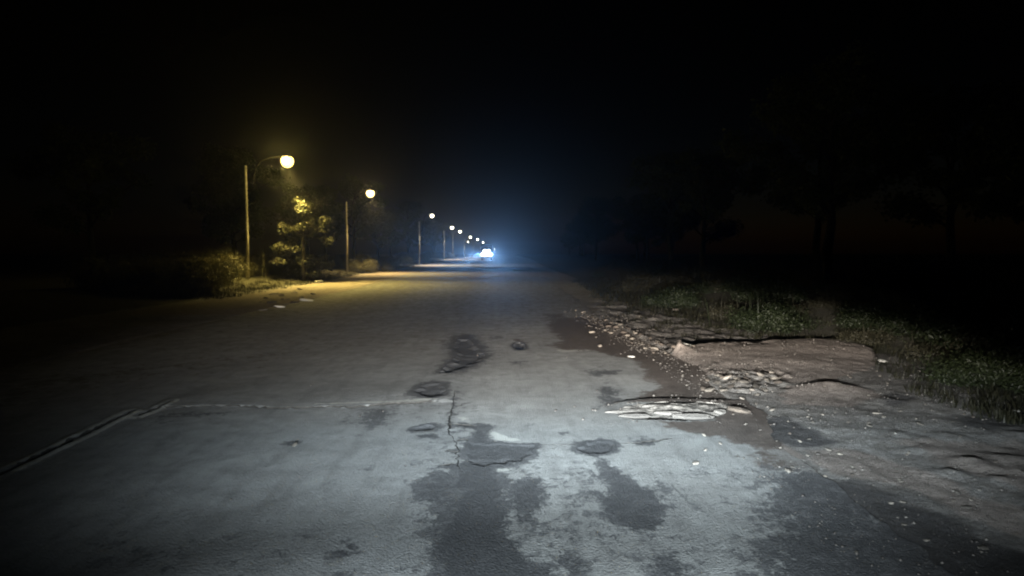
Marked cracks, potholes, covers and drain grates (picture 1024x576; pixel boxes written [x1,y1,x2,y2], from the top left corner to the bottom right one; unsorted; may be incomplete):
pothole [413,383,446,397]
pothole [466,443,536,467]
crack [165,390,477,469]
pothole [605,401,731,421]
pothole [440,339,485,373]
pothole [576,441,615,454]
